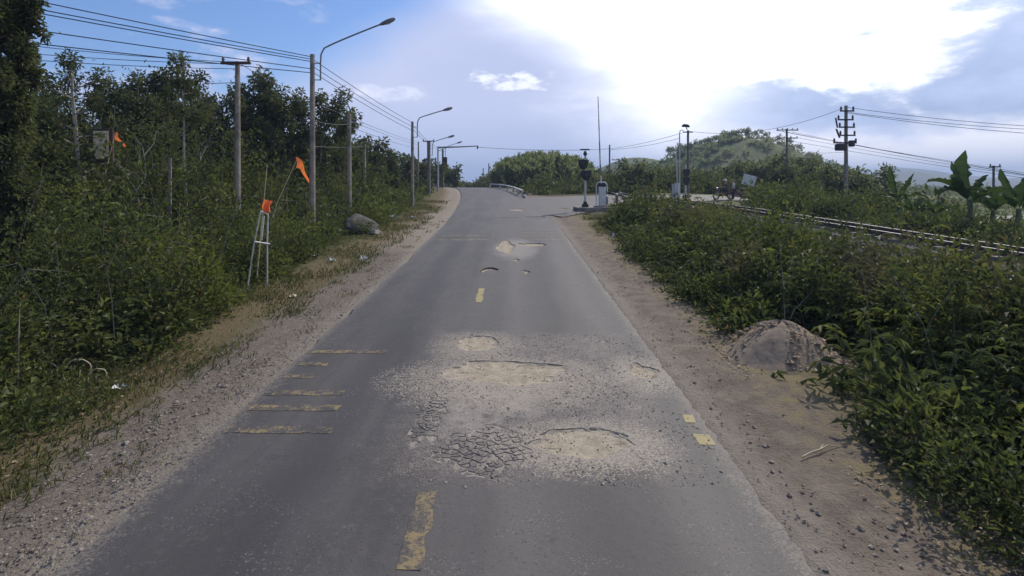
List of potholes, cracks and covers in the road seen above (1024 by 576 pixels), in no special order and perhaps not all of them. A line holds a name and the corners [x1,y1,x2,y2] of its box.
pothole [458,336,499,351]
pothole [528,427,633,459]
pothole [496,240,515,254]
crack [406,392,533,485]
pothole [630,363,660,379]
pothole [440,360,569,386]
